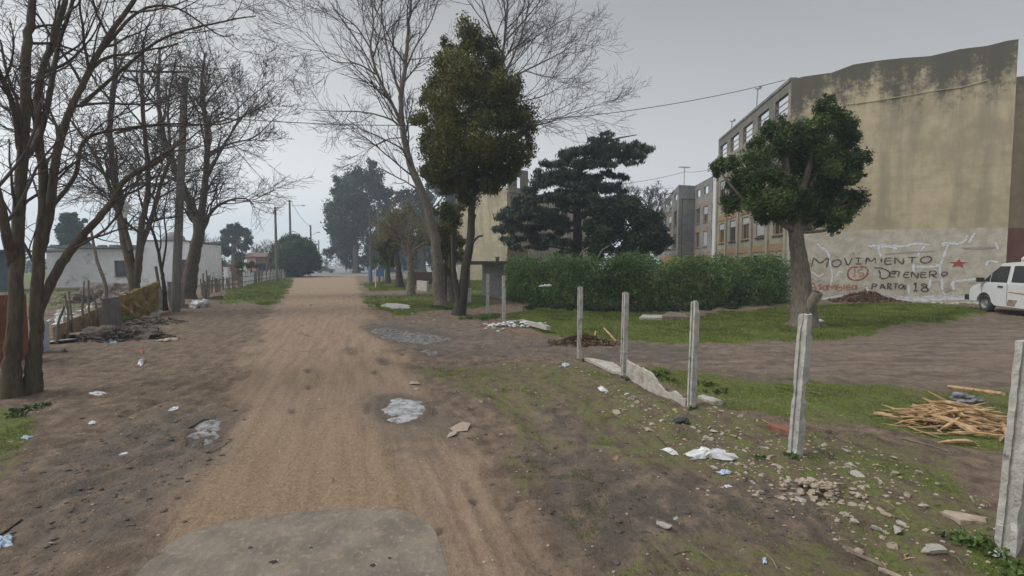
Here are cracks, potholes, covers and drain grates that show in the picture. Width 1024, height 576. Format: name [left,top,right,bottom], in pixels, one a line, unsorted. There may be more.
pothole [362,391,447,428]
pothole [410,346,452,358]
pothole [169,409,239,456]
